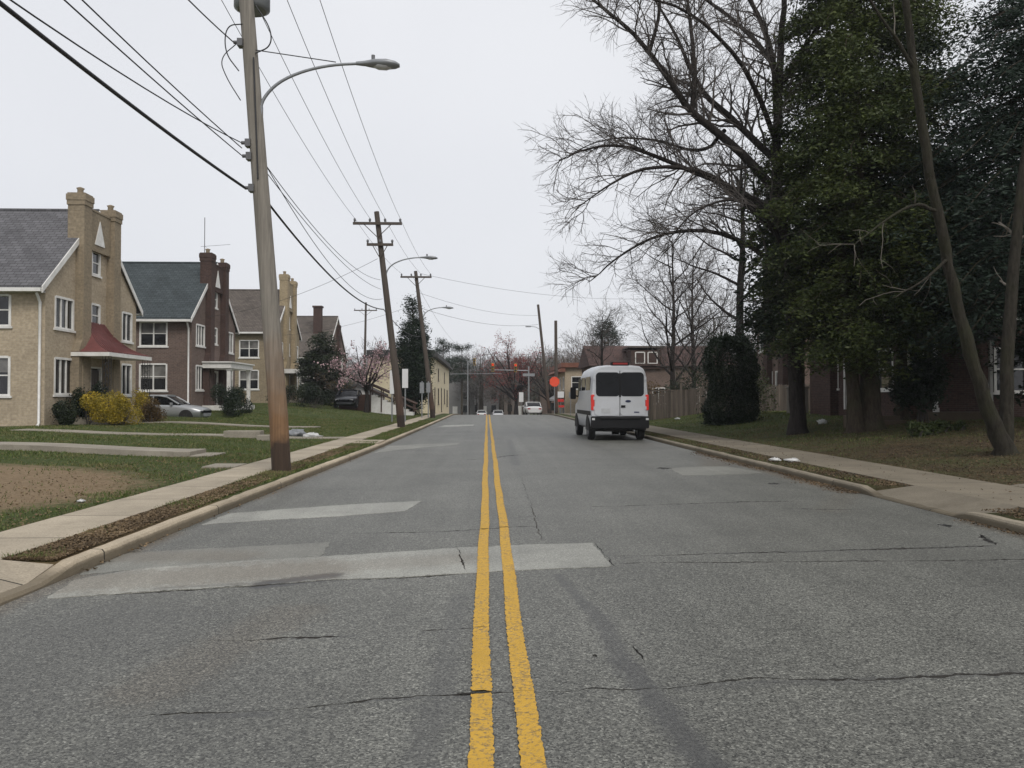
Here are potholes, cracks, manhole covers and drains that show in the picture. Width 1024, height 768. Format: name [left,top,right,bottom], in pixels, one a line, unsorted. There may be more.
crack [121,672,1024,719]
crack [621,534,1024,564]
crack [336,483,542,569]
crack [184,628,474,642]
